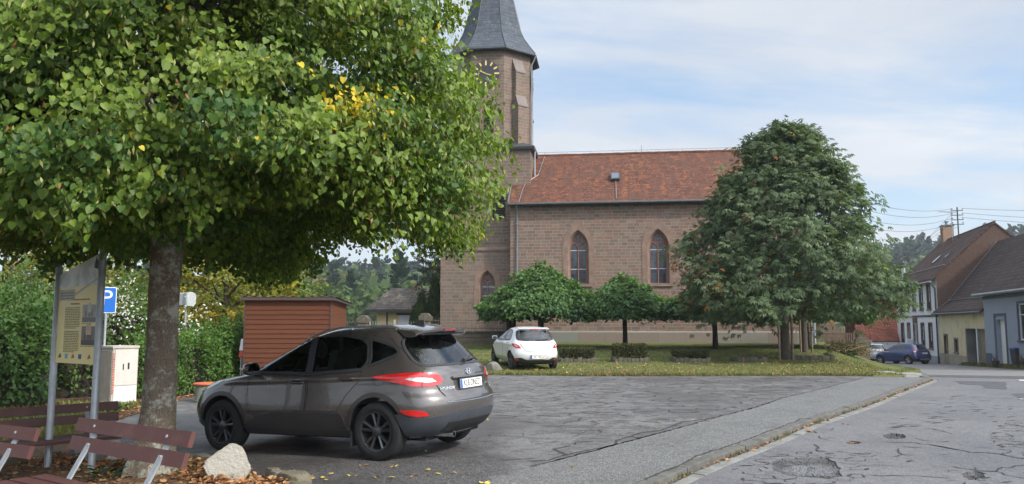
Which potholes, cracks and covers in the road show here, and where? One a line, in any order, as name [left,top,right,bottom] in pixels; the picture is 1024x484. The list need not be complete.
crack [468,378,861,467]
crack [733,386,1024,484]
pothole [962,471,986,480]
pothole [772,457,842,479]
